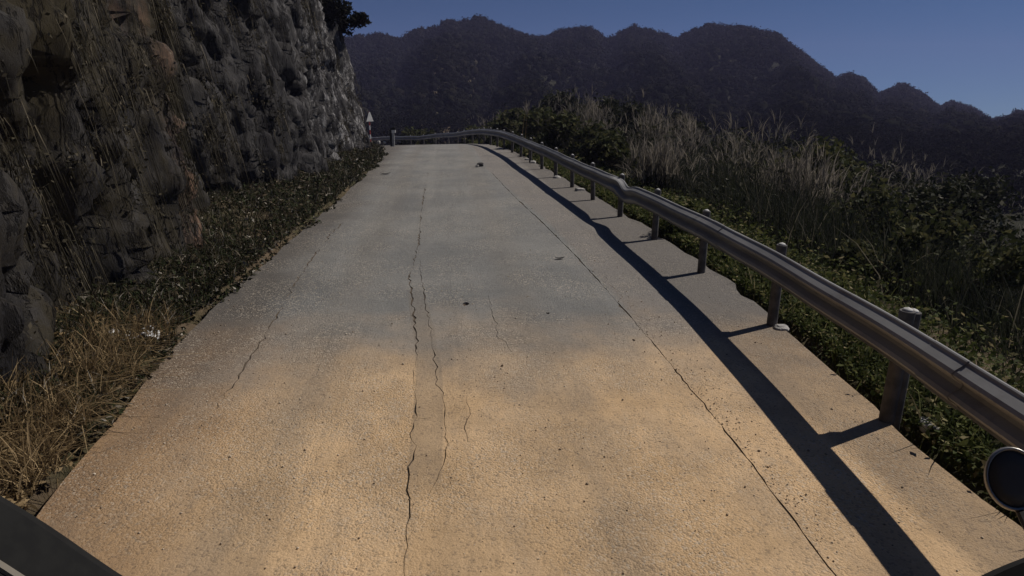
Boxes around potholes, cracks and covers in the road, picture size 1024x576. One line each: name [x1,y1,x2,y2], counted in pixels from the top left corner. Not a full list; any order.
crack [404,185,470,560]
crack [207,223,342,418]
